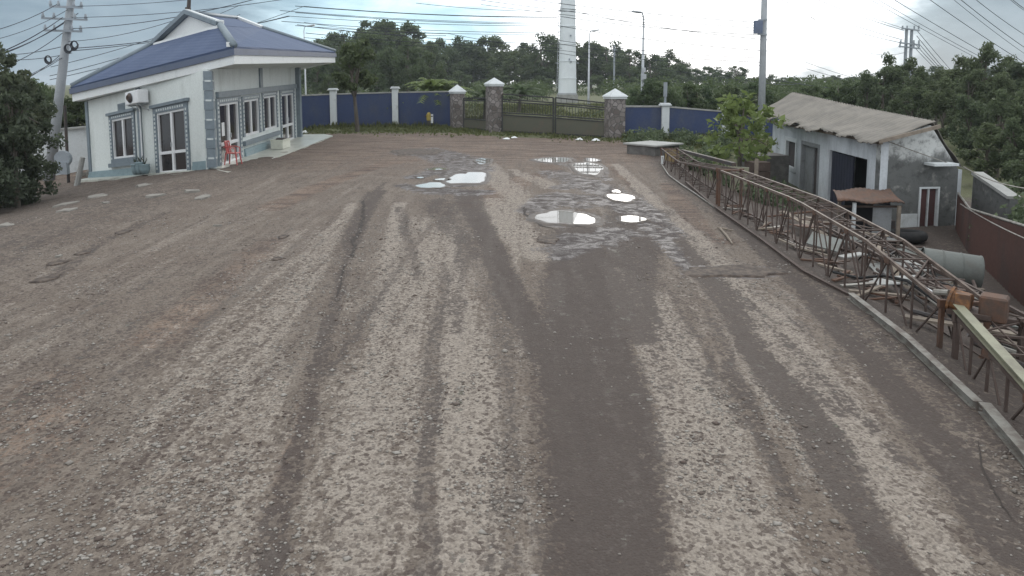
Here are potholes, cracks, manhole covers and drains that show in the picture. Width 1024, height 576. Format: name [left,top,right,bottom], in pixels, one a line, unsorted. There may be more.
pothole [603,193,639,204]
crack [978,441,1015,521]
pothole [411,181,450,190]
pothole [567,161,609,178]
pothole [526,209,605,227]
pothole [617,215,651,225]
pothole [441,171,492,186]
